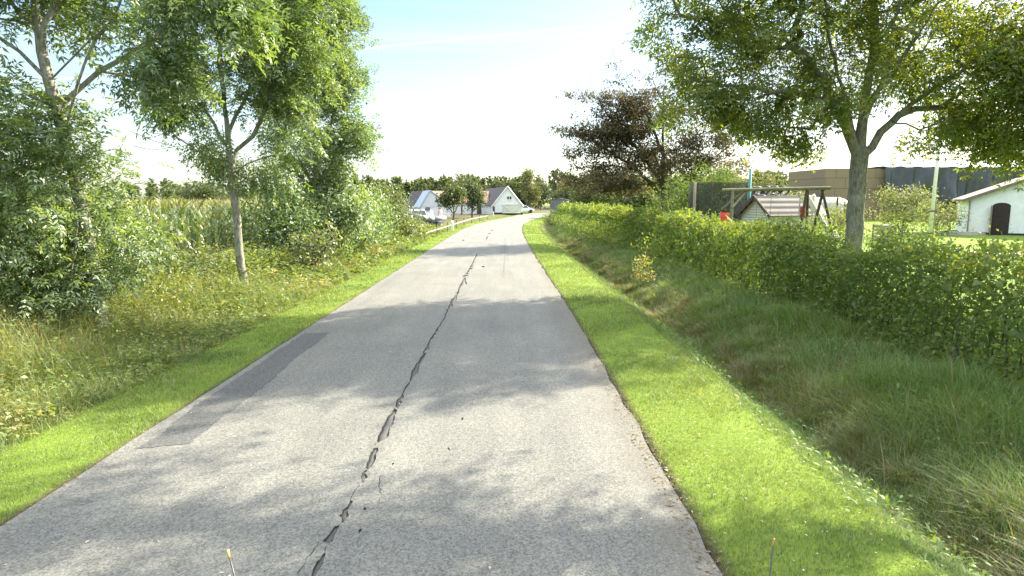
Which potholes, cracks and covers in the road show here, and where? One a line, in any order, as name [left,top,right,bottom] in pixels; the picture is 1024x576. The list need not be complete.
crack [298,254,477,573]
